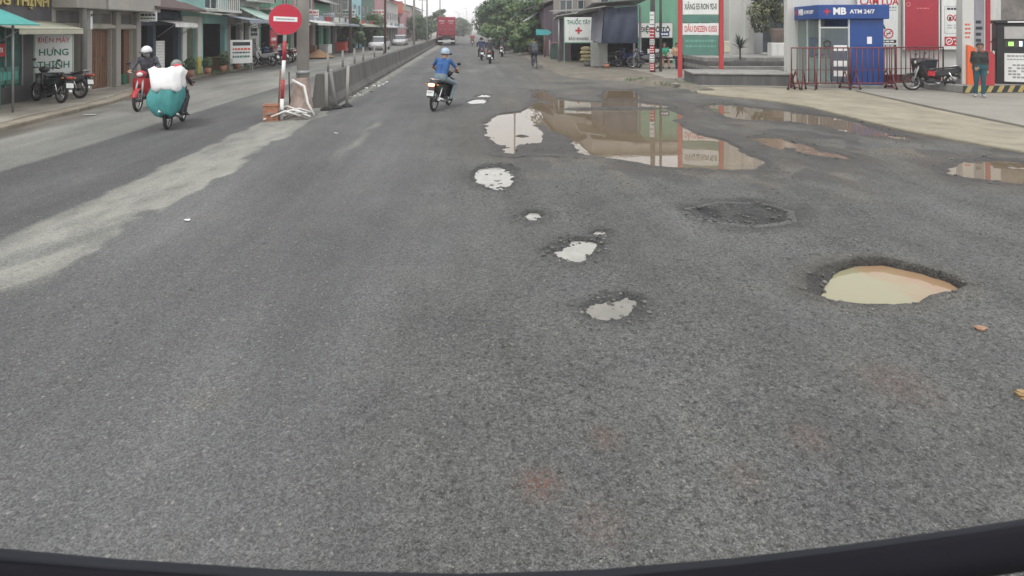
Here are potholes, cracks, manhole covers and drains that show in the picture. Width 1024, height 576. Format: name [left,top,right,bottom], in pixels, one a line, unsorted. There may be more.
pothole [535,234,615,267]
pothole [682,201,796,228]
pothole [513,208,553,224]
pothole [473,89,786,172]
pothole [930,155,1024,186]
pothole [794,254,979,310]
pothole [463,97,493,105]
pothole [696,102,925,141]
pothole [568,287,657,329]
pothole [464,162,526,193]
pothole [742,133,864,162]
